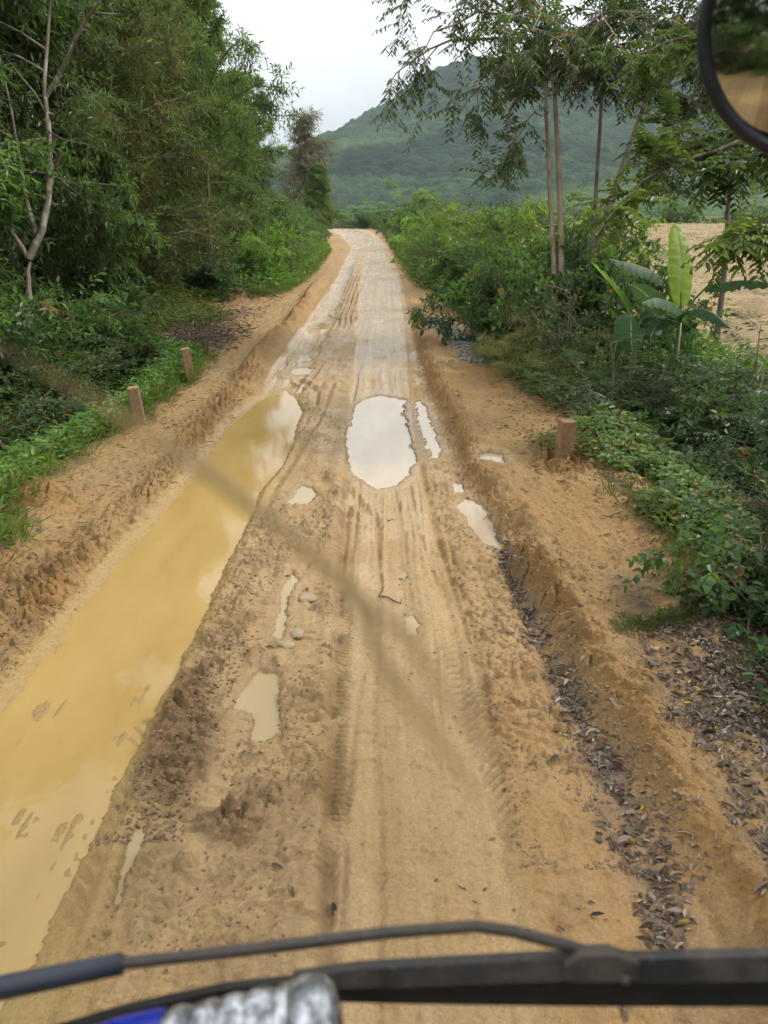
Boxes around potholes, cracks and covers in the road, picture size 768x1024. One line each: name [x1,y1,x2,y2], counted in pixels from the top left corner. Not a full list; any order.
pothole [411,398,450,461]
pothole [337,392,427,492]
pothole [446,493,513,555]
pothole [470,444,515,465]
pothole [279,481,324,508]
pothole [0,388,311,1024]
